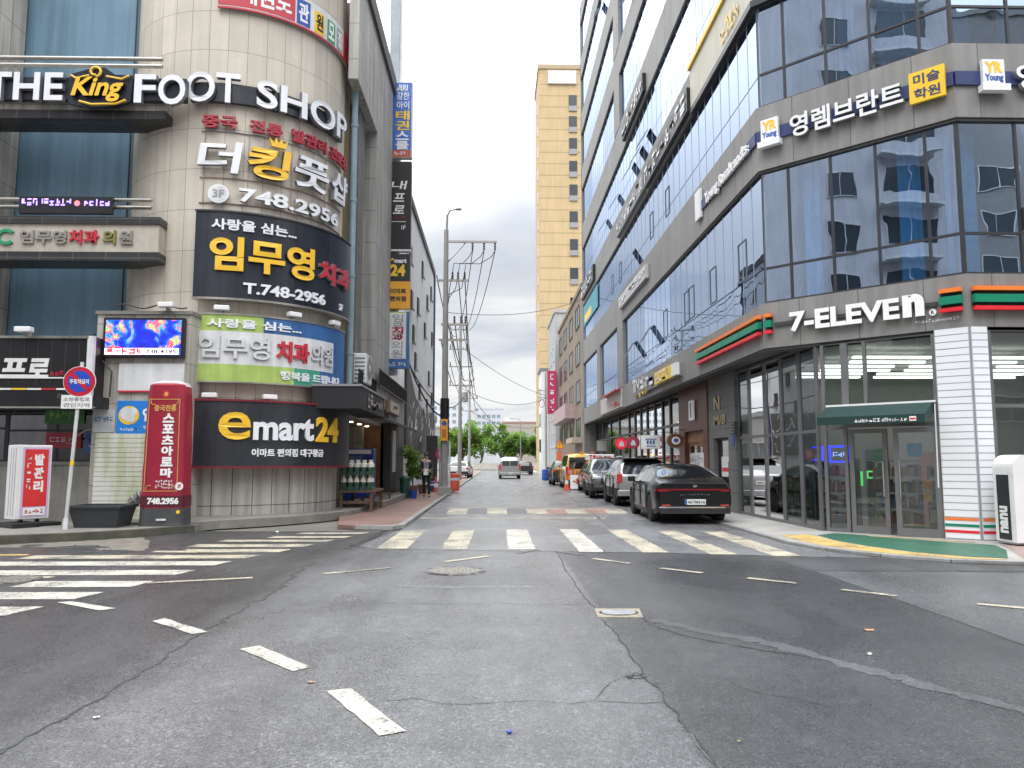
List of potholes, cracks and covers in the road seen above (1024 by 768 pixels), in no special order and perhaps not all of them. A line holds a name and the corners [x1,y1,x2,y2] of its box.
manhole cover [423,566,487,575]
manhole cover [594,608,643,618]
crack [395,672,657,704]
